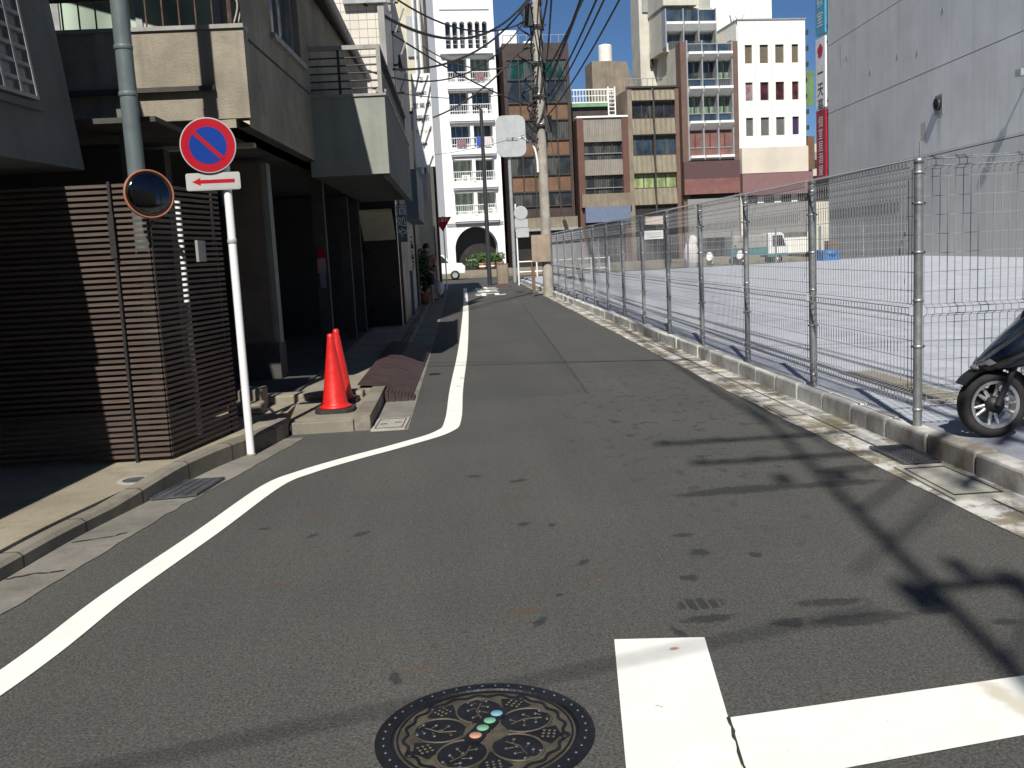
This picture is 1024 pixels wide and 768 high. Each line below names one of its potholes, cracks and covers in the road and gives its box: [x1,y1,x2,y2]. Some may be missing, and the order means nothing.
drain grate [150,477,225,500]
drain grate [869,444,942,465]
manhole cover [374,683,595,768]
manhole cover [116,476,146,485]
